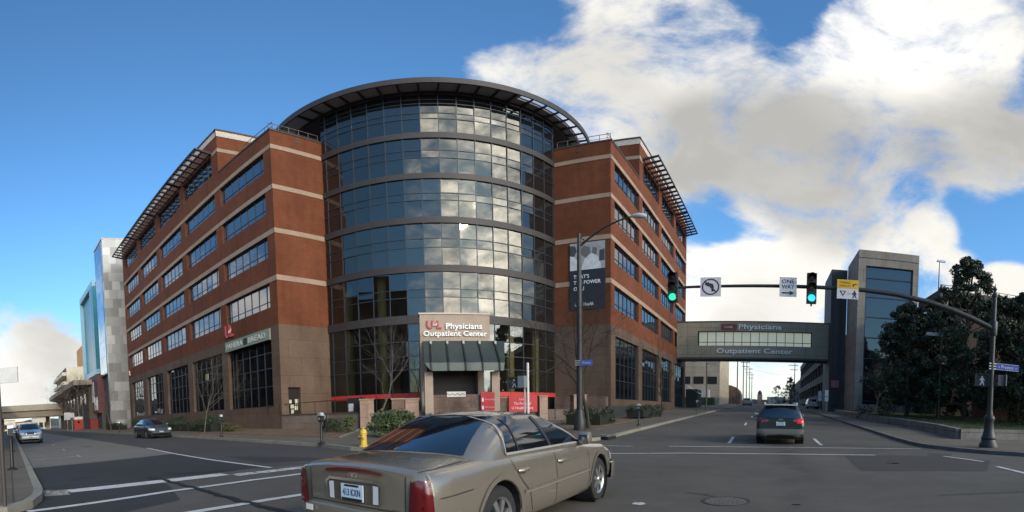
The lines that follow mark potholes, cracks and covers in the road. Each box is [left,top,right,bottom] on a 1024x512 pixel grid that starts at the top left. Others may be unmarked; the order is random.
manhole cover [701,496,750,506]
